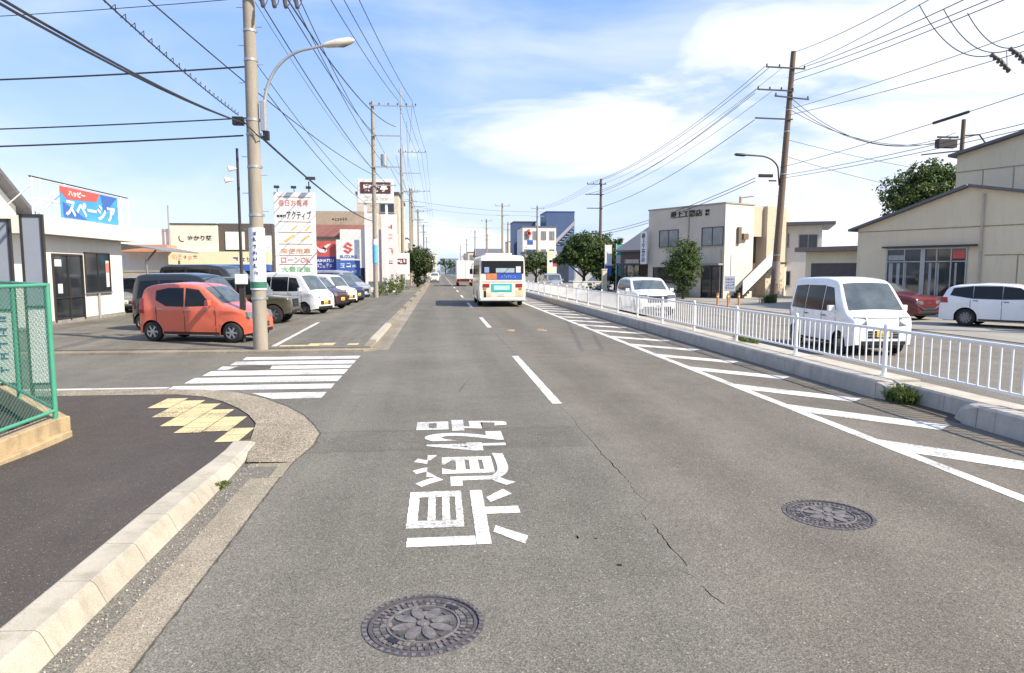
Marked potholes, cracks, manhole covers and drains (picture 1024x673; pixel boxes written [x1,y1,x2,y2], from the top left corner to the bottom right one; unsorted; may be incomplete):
manhole cover [782,499,877,531]
crack [559,406,724,604]
manhole cover [361,593,484,657]
